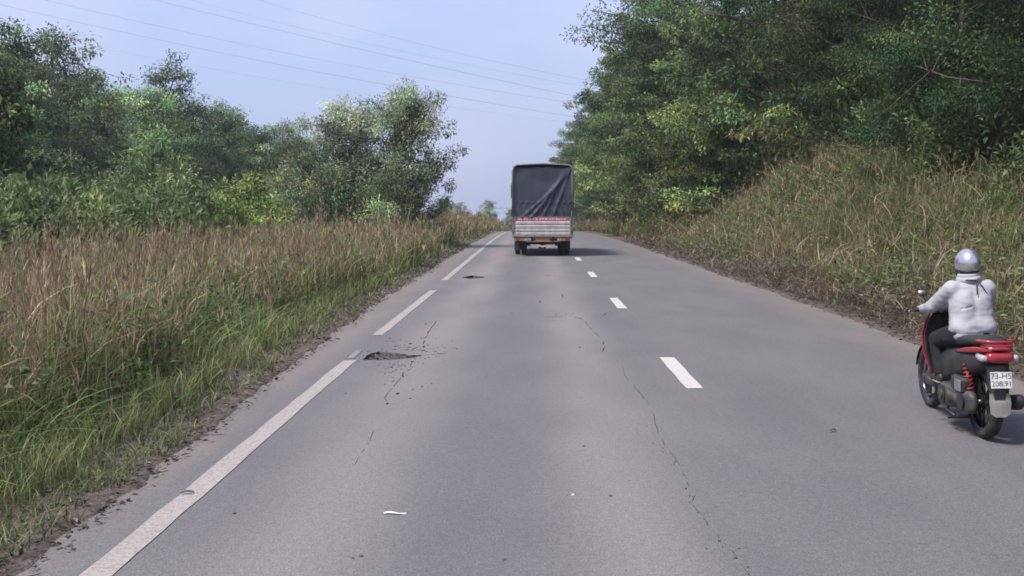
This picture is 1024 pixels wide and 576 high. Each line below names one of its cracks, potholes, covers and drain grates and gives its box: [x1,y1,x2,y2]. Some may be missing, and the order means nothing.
crack [623,369,750,576]
pothole [363,352,423,360]
crack [384,321,447,405]
